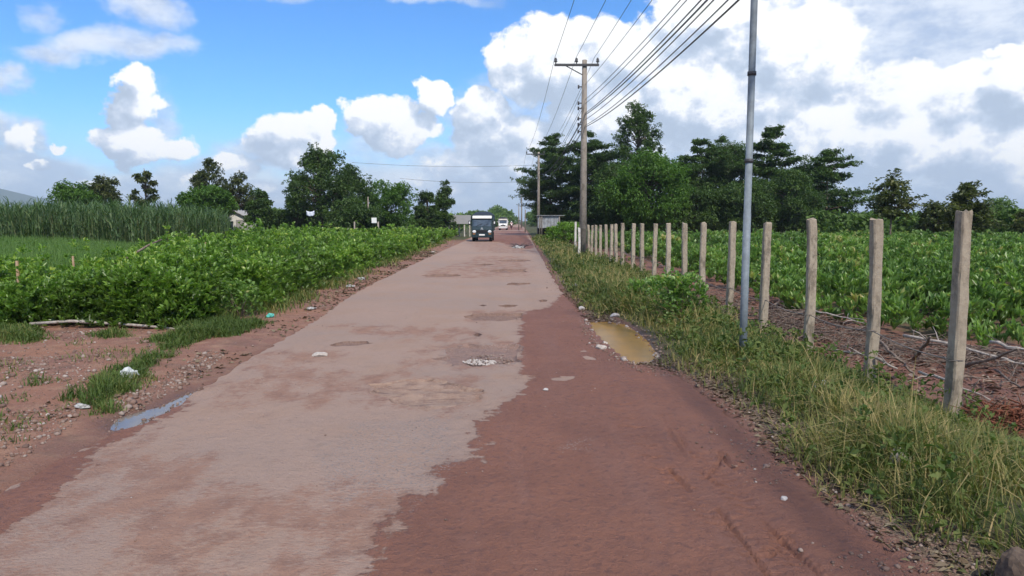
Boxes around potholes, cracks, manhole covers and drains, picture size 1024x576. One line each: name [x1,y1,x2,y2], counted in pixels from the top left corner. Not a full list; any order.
pothole [464,313,524,321]
pothole [433,344,524,367]
